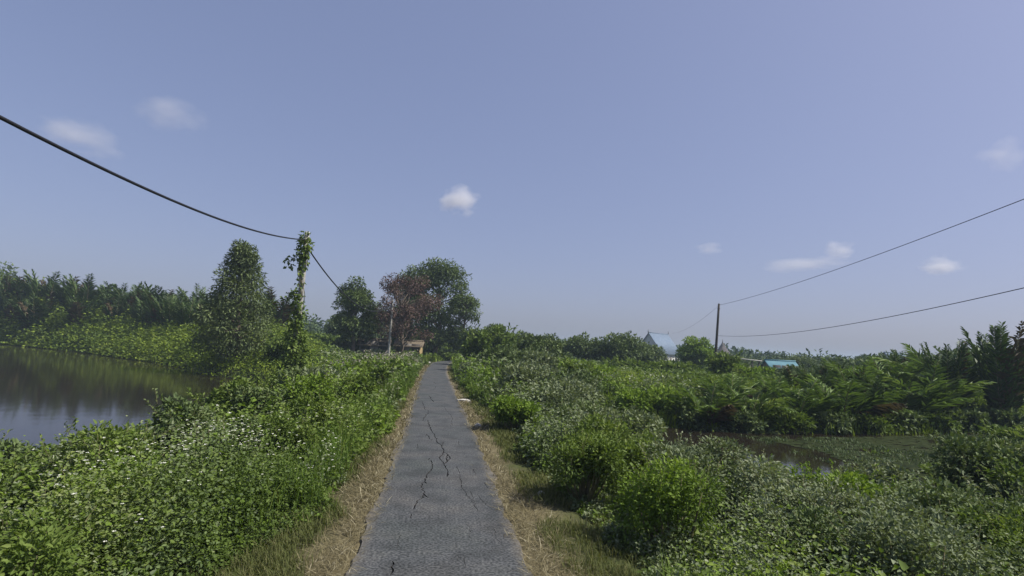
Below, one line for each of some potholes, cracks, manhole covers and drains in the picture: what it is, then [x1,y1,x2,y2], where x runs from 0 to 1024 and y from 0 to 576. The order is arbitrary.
crack [391,383,487,574]
